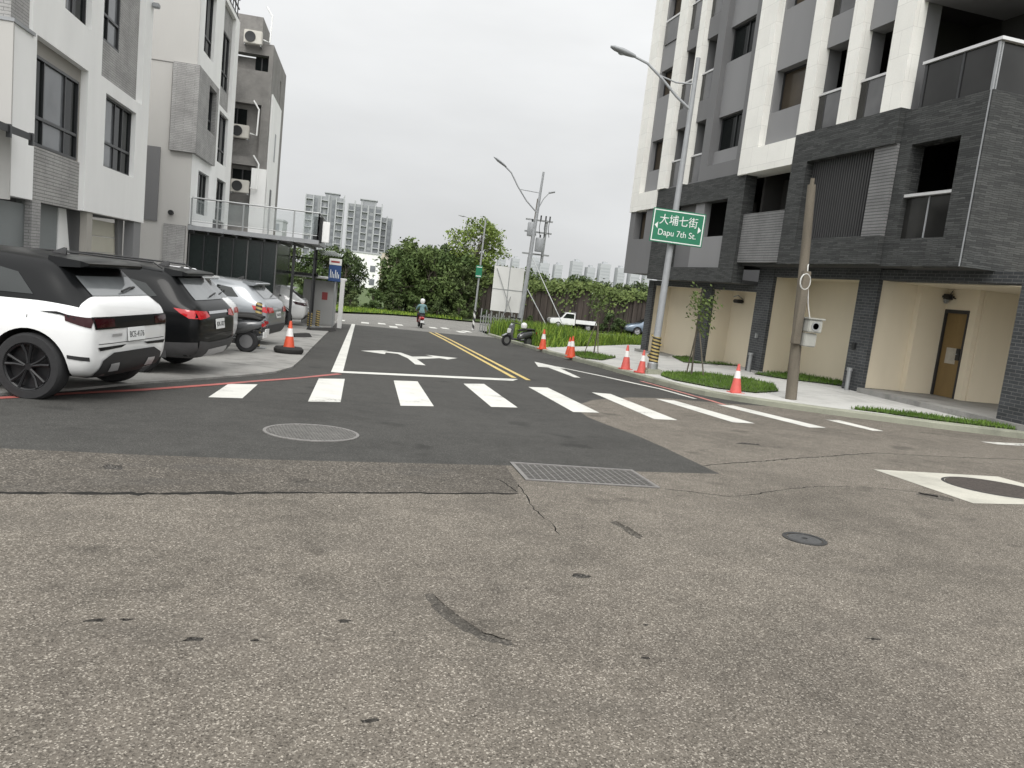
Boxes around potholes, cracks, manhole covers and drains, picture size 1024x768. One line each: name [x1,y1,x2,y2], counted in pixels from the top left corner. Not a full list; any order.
crack [704,453,1024,466]
crack [668,486,938,497]
drain grate [510,462,660,489]
manhole cover [262,424,359,442]
crack [498,479,560,535]
manhole cover [782,532,828,546]
